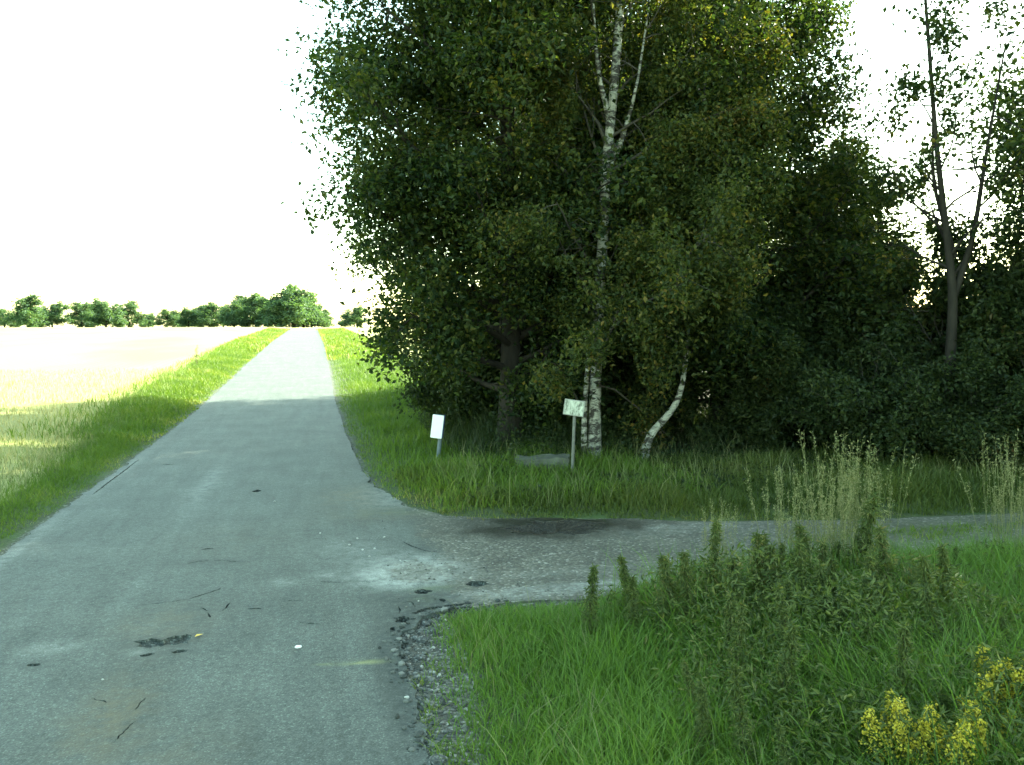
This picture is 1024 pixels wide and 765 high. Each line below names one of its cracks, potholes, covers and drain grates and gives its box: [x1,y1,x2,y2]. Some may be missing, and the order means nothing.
pothole [134,634,192,648]
crack [145,588,230,617]
